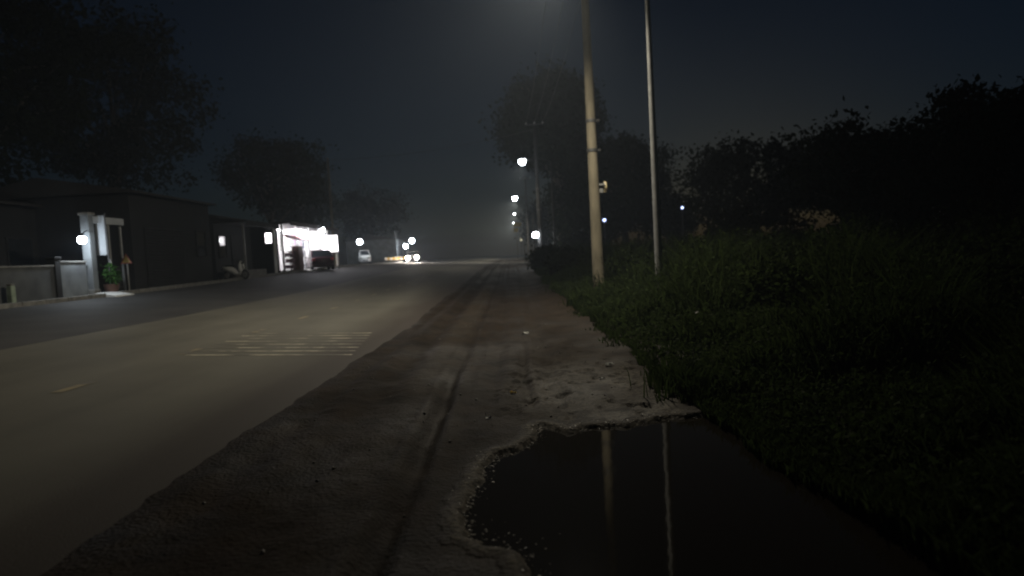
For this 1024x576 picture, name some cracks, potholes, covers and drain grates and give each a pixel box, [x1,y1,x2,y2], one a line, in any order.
pothole [437,409,948,576]
